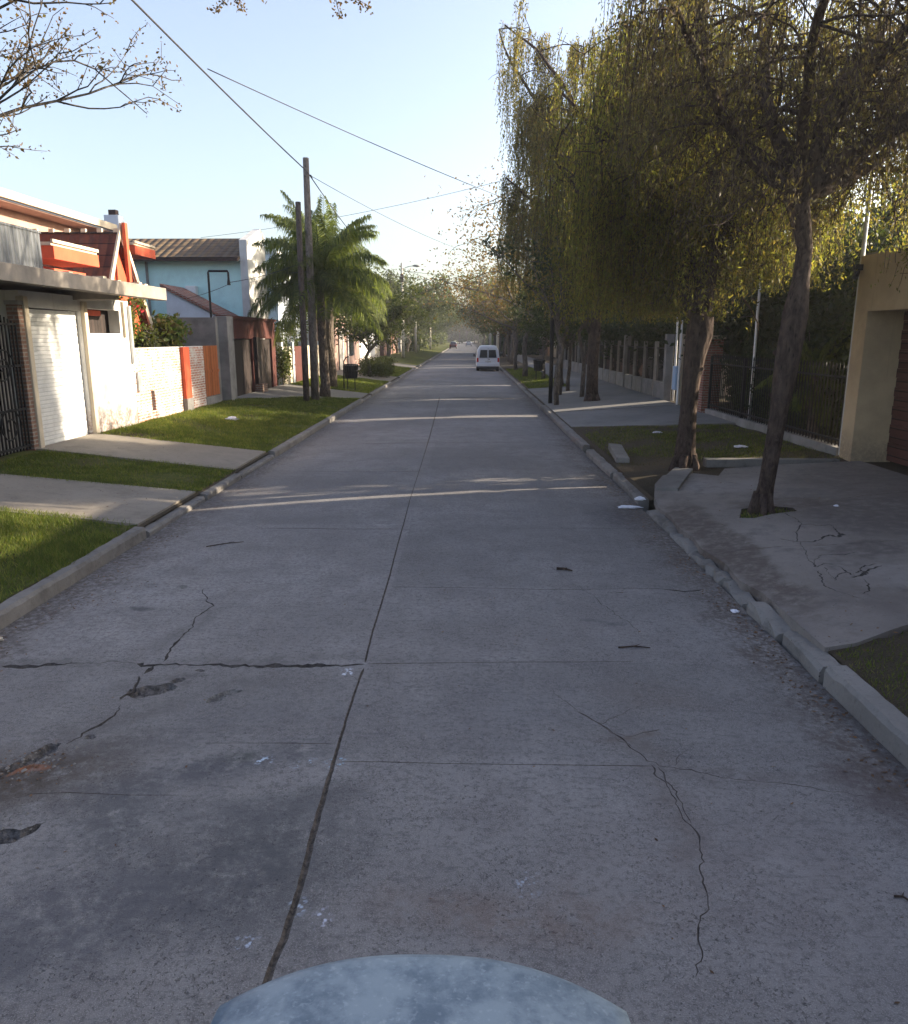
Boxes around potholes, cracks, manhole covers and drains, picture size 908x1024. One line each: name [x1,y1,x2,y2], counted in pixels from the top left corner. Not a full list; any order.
crack [2,590,363,744]
crack [553,691,867,976]
crack [779,513,882,598]
pothole [0,822,45,844]
pothole [0,743,61,778]
pothole [127,683,177,699]
